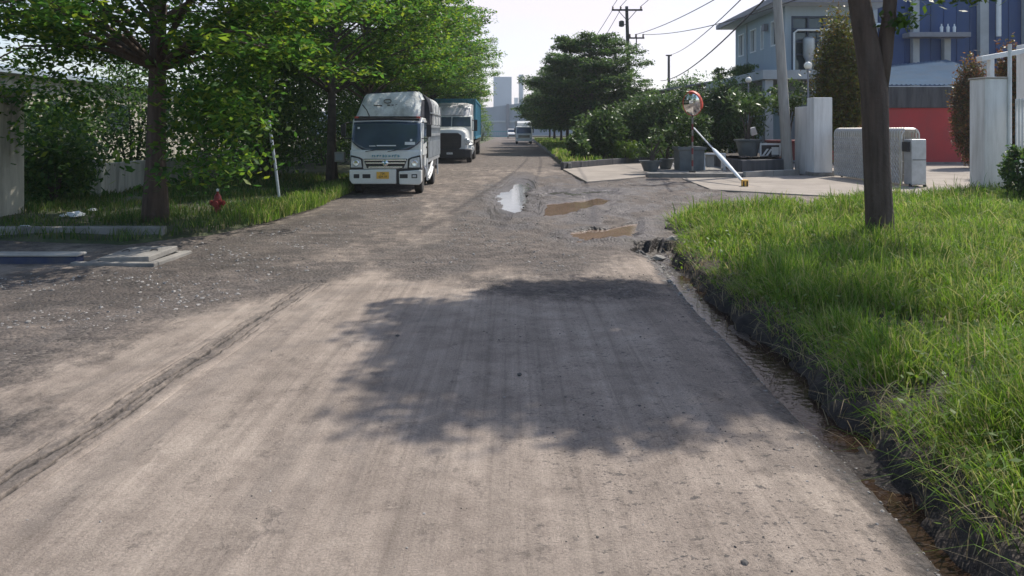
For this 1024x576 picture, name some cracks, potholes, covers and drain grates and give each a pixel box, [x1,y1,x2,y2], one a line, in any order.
pothole [521,193,620,218]
pothole [550,220,660,246]
pothole [625,236,673,266]
pothole [480,175,547,223]
